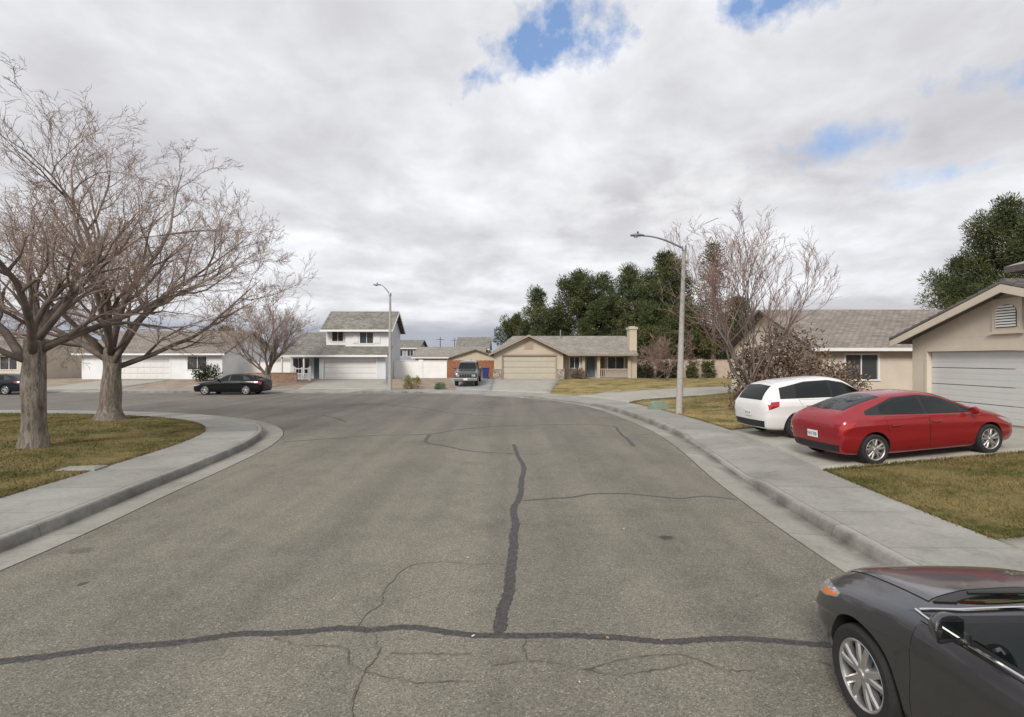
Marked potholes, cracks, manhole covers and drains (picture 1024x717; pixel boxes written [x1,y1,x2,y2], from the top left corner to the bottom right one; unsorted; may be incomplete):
crack [492,640,831,676]
crack [273,561,504,717]
